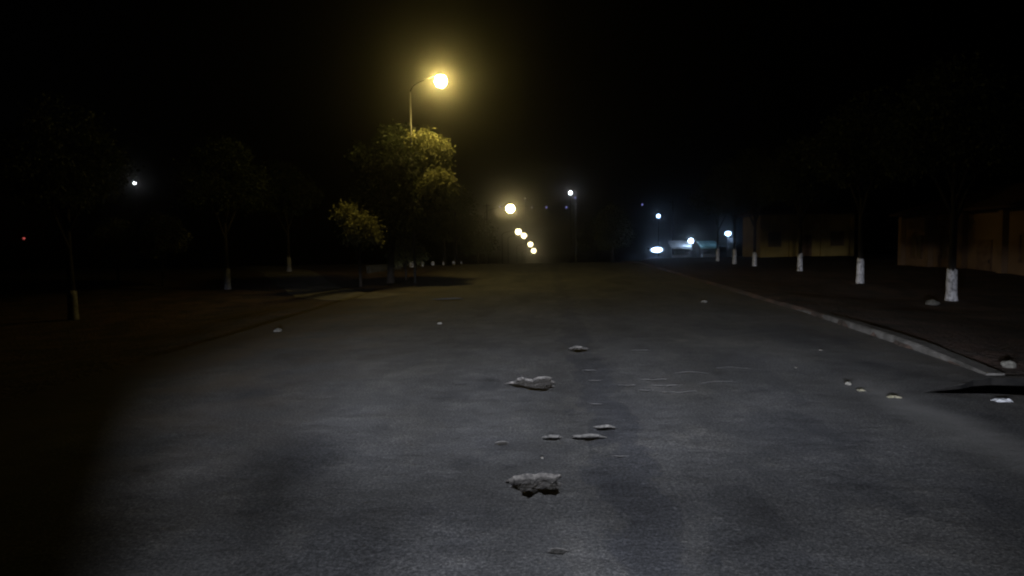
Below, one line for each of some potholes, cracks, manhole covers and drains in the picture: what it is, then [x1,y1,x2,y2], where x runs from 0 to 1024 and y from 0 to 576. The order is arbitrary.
crack [618,367,739,393]
